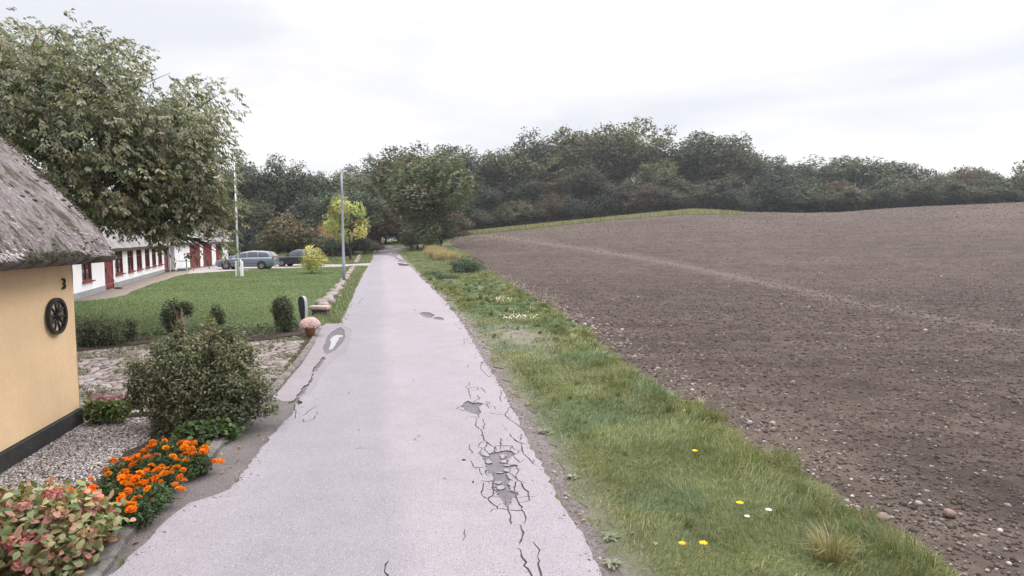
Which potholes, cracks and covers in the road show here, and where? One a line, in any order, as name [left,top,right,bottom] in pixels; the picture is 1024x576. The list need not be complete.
pothole [462,402,482,415]
pothole [323,328,345,354]
crack [466,384,542,576]
